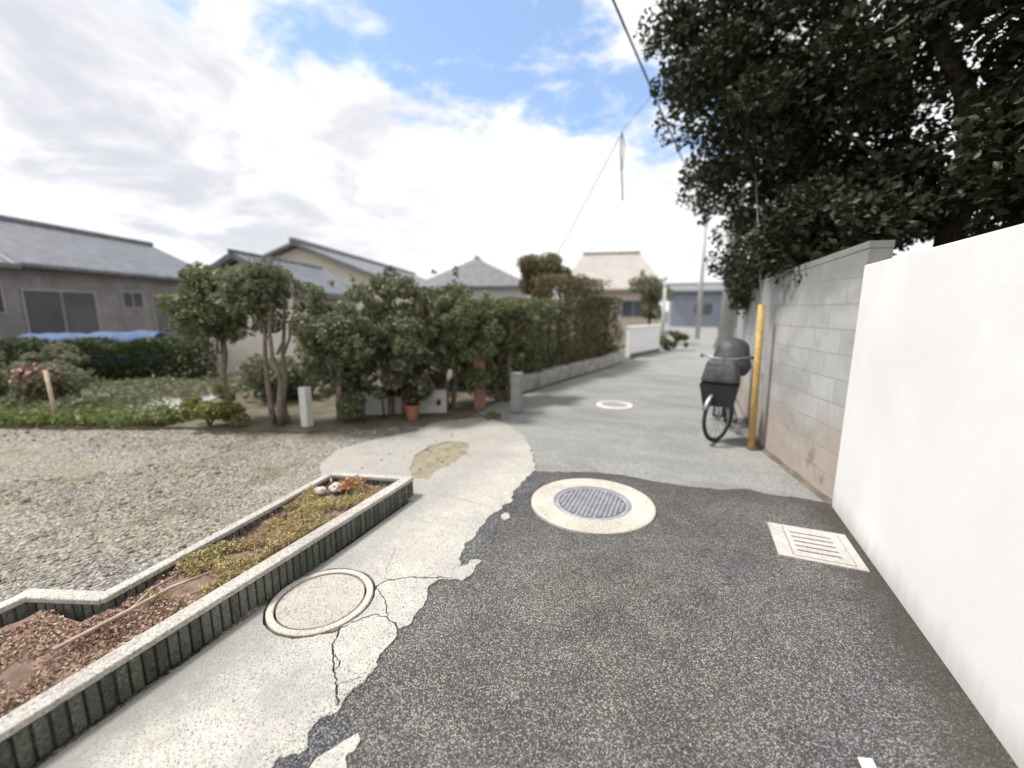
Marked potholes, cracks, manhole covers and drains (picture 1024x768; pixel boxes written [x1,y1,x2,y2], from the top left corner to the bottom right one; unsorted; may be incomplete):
crack [331,553,442,701]
drain grate [767,522,870,573]
manhole cover [263,569,375,639]
manhole cover [531,478,656,536]
manhole cover [596,401,633,409]
